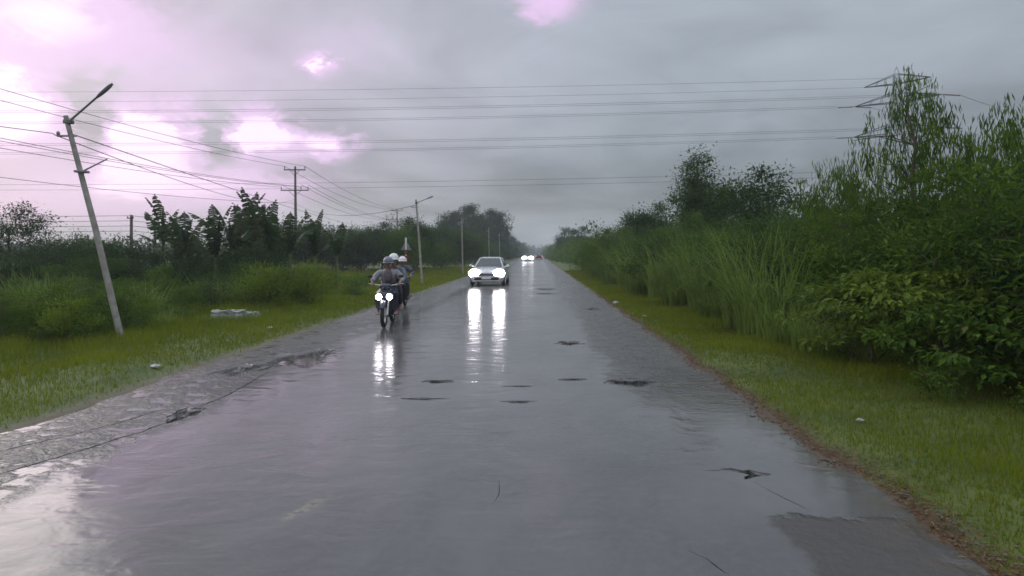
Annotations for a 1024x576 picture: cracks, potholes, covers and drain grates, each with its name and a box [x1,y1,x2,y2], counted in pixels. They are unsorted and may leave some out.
pothole [721,468,770,479]
pothole [256,348,345,370]
pothole [603,378,662,387]
crack [0,410,173,474]
crack [201,371,269,406]
pothole [207,363,274,377]
pothole [166,407,207,422]
